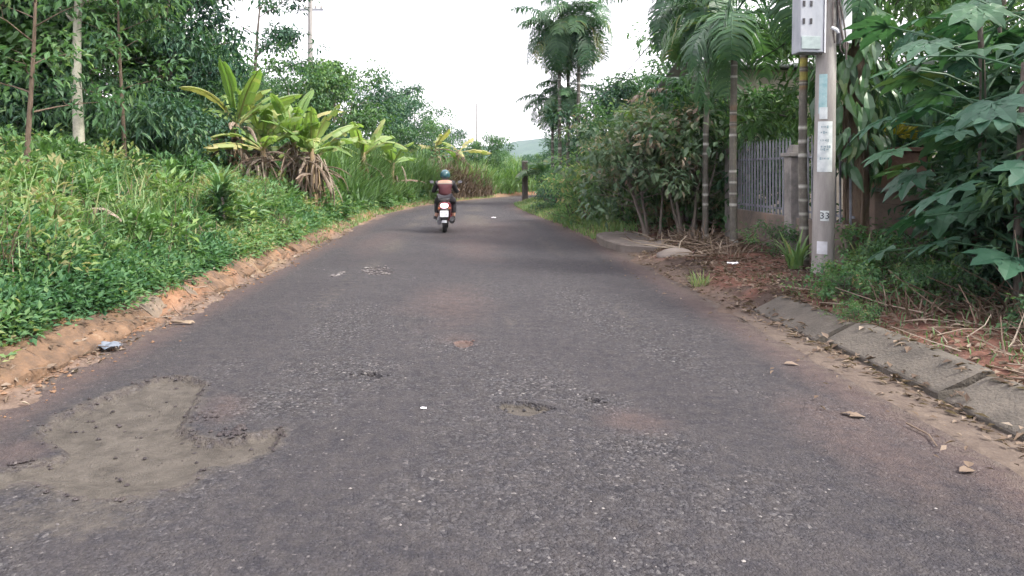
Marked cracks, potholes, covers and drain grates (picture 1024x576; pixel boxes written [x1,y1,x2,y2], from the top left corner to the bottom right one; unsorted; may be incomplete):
pothole [0,374,287,503]
pothole [361,265,395,275]
pothole [497,398,557,416]
pothole [349,370,390,379]
pothole [454,340,475,348]
